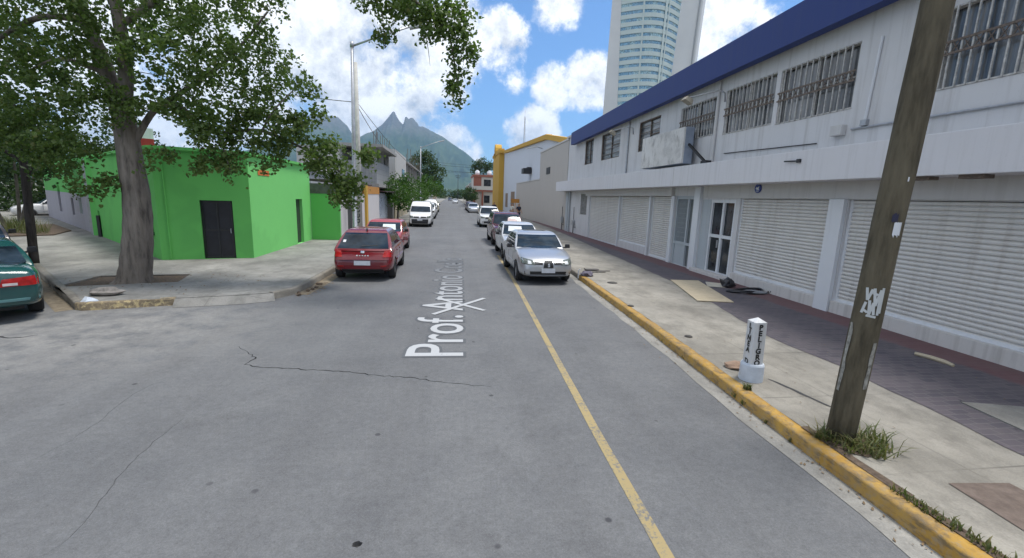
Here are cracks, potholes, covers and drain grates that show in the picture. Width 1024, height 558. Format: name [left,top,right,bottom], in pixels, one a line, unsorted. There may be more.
crack [239,347,490,387]
crack [46,422,179,554]
